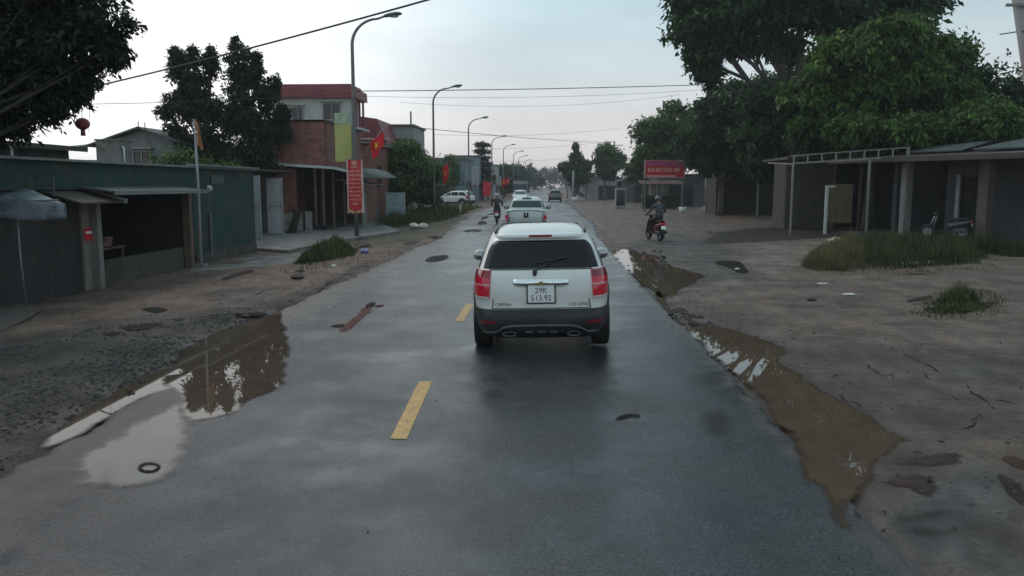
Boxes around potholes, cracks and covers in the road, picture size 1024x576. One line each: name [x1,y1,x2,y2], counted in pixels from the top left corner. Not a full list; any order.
crack [862,334,948,378]
pothole [123,323,160,331]
crack [951,385,1022,430]
pothole [715,261,749,273]
